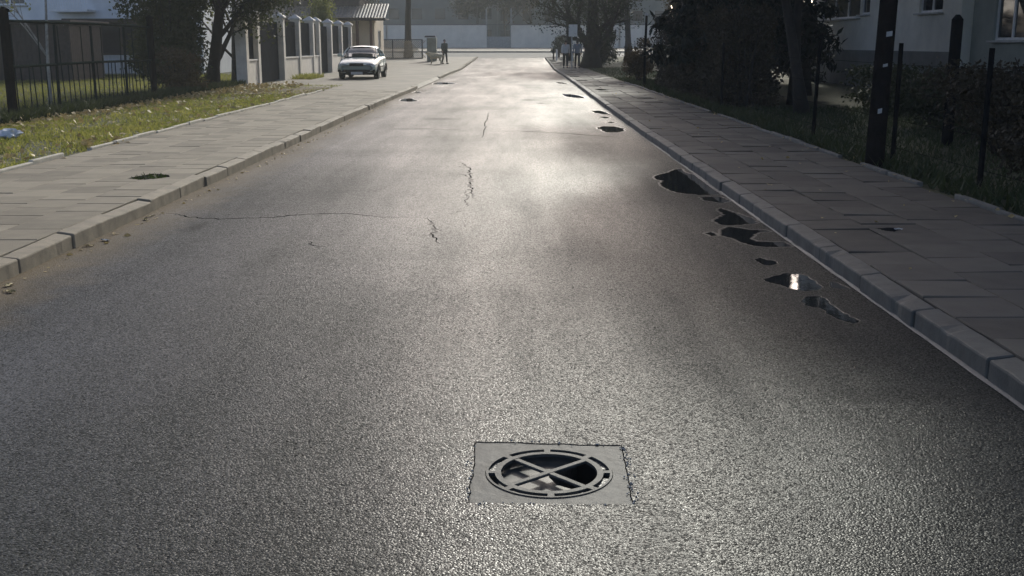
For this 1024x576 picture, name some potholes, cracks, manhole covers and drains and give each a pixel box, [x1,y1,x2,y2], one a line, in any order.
crack [166,213,441,244]
crack [454,161,475,213]
pothole [129,172,170,180]
